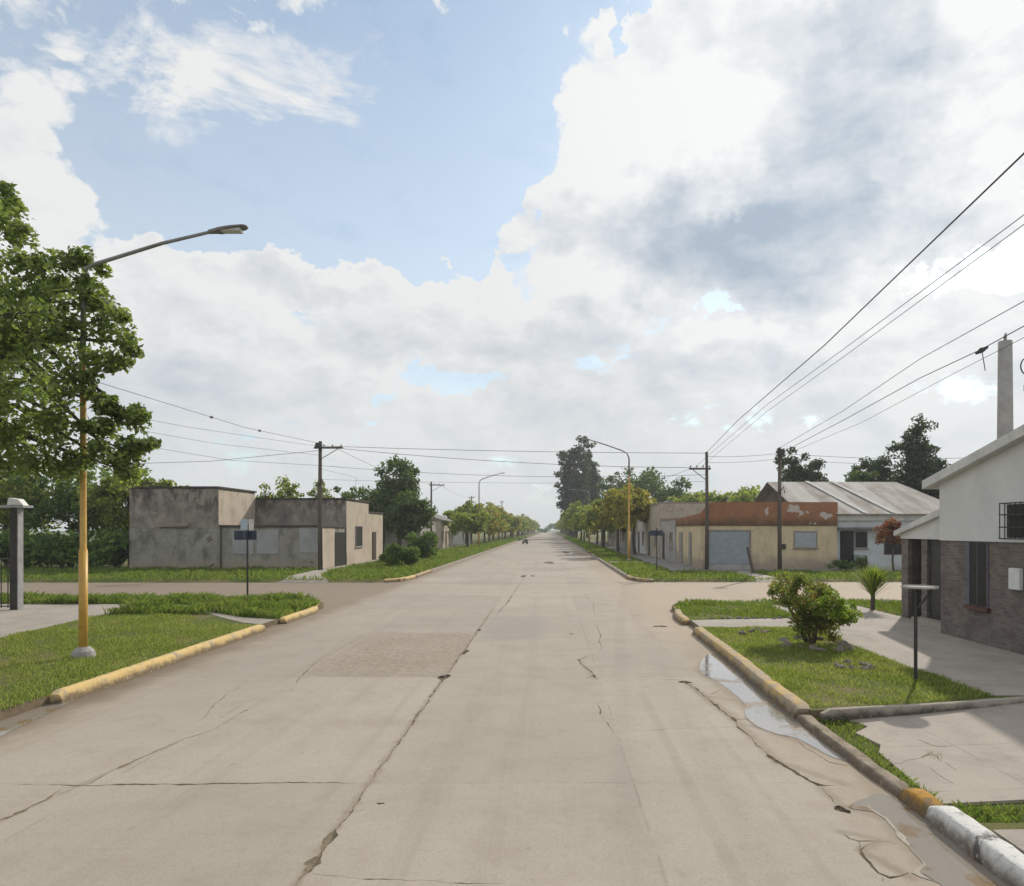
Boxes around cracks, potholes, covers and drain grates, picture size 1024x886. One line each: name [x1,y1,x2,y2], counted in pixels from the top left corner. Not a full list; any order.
crack [892,741,956,783]
crack [641,682,844,805]
crack [1,574,527,885]
crack [843,833,909,879]
crack [578,595,602,679]
